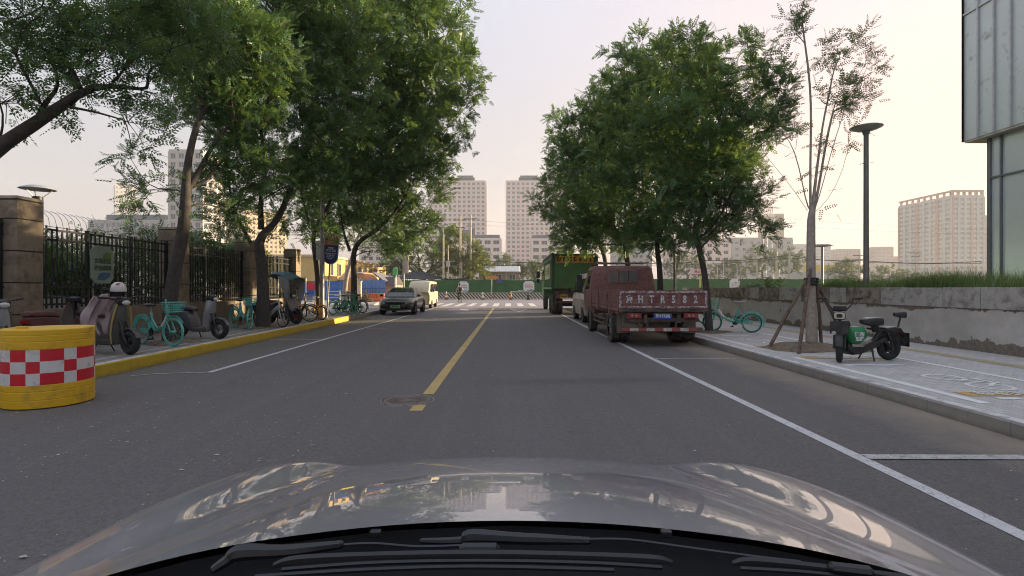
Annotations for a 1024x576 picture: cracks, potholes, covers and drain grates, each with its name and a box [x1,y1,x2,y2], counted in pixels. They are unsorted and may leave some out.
manhole cover [380,394,435,407]
